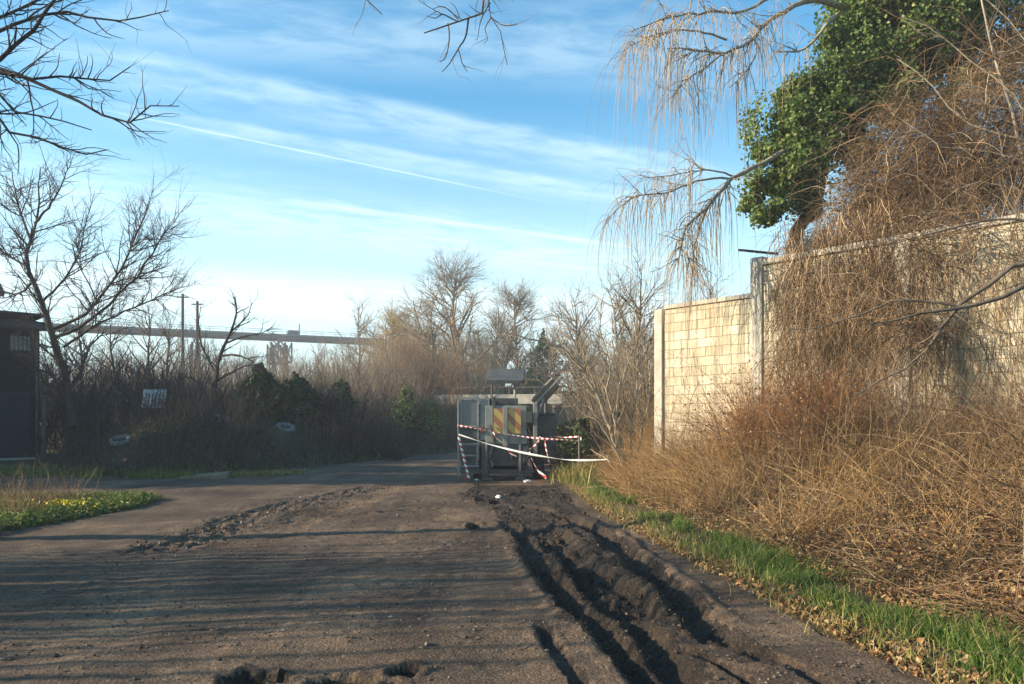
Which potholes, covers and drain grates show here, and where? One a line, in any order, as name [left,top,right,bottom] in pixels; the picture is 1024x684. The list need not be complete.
pothole [271,668,291,684]
pothole [216,669,279,684]
pothole [389,663,423,679]
pothole [312,673,382,684]
